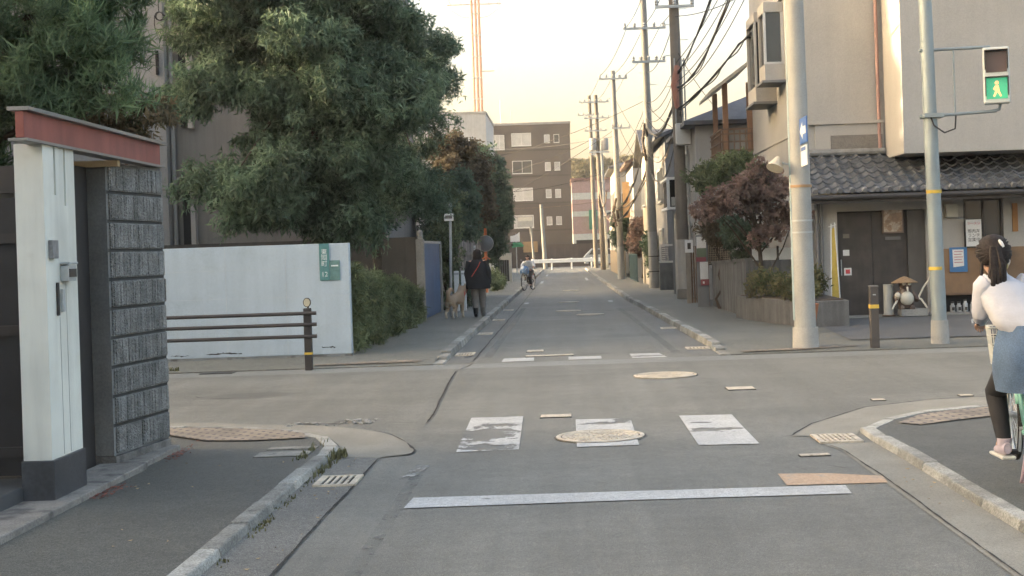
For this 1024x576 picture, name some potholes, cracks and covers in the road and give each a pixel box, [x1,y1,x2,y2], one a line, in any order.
manhole cover [633,371,698,379]
crack [426,355,474,423]
drain grate [810,433,864,444]
drain grate [312,474,364,487]
manhole cover [554,429,646,443]
